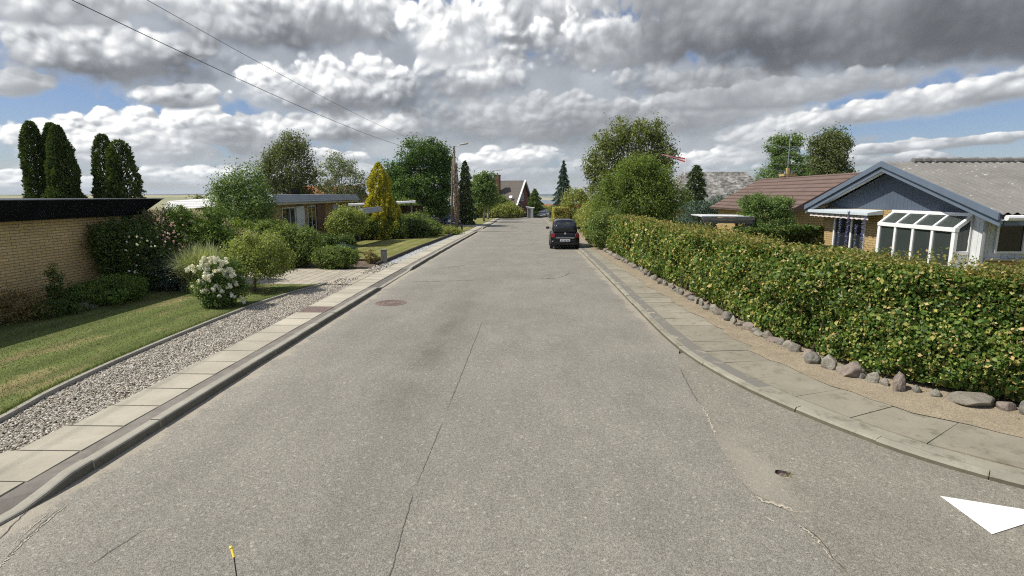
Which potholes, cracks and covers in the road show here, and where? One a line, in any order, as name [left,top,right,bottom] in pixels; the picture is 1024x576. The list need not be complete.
crack [388,424,442,576]
crack [751,495,848,573]
